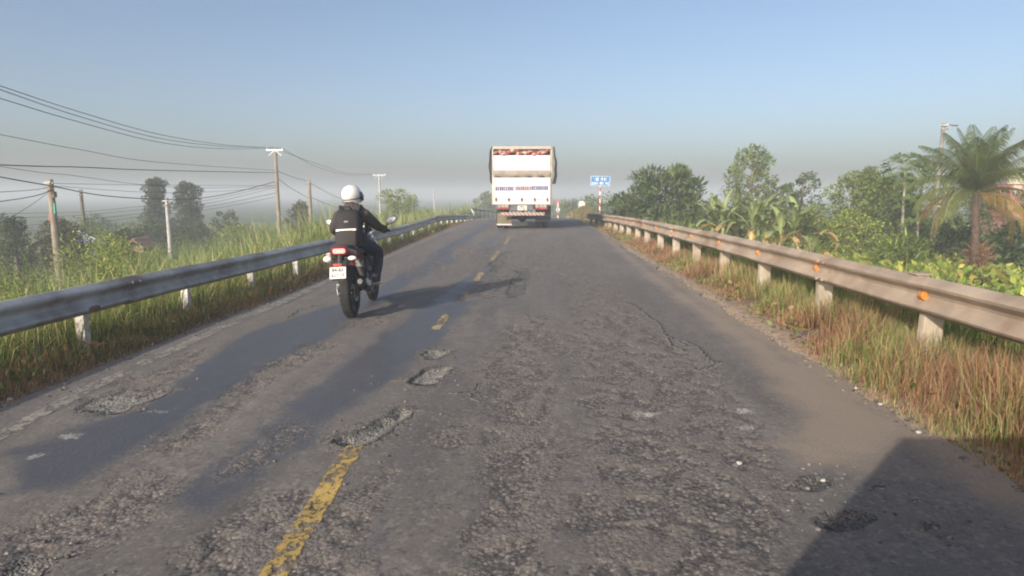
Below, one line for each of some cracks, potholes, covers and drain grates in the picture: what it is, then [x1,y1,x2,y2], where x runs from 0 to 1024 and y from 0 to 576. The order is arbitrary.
pothole [76,389,173,416]
pothole [790,473,834,493]
pothole [328,406,415,449]
crack [625,302,724,372]
pothole [407,365,456,386]
pothole [421,348,450,360]
pothole [810,508,878,534]
